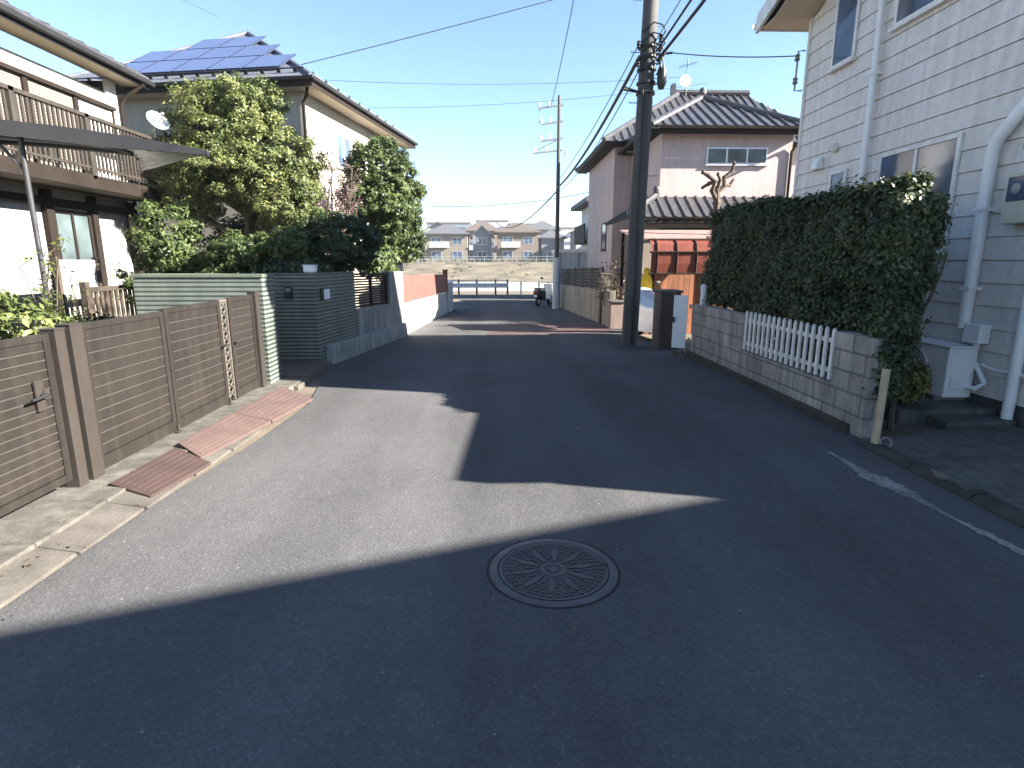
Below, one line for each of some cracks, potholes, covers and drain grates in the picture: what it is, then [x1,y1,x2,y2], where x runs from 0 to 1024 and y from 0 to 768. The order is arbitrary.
manhole cover [487,538,621,609]
